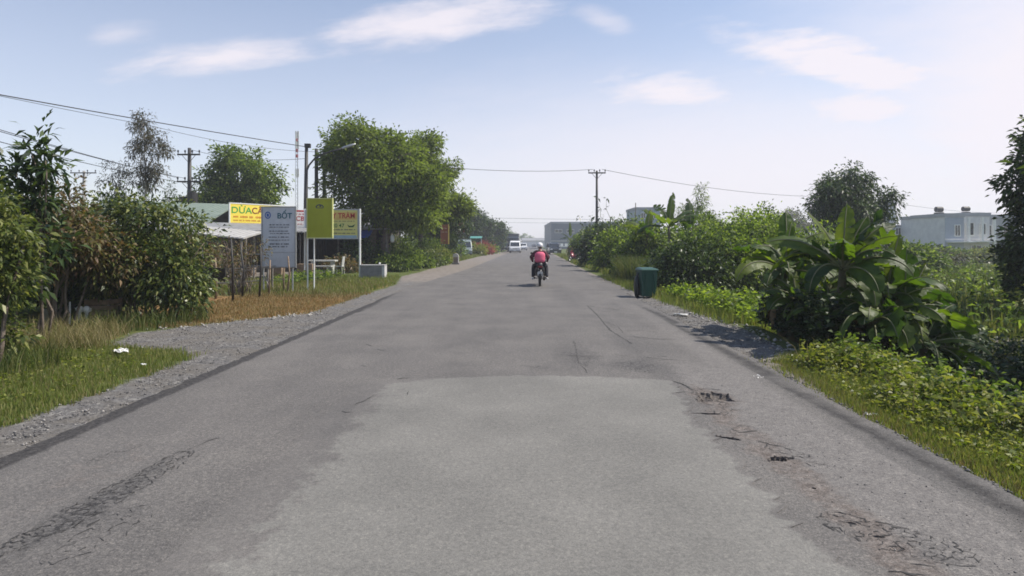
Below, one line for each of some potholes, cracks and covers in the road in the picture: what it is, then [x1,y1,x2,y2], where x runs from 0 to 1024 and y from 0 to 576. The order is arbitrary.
pothole [696,391,734,402]
crack [585,289,687,373]
crack [817,512,981,576]
crack [0,438,216,565]
